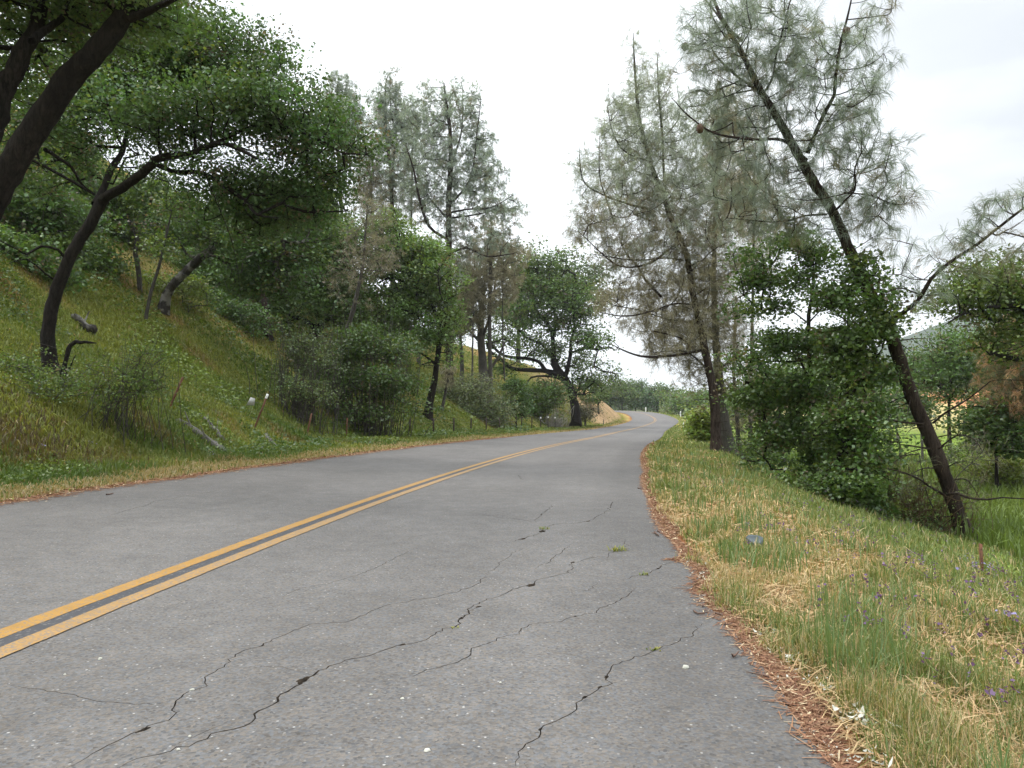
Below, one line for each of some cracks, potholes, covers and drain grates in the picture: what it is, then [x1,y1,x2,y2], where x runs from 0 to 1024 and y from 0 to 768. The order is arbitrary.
crack [482,502,613,541]
crack [1,543,629,768]
crack [501,623,707,766]
